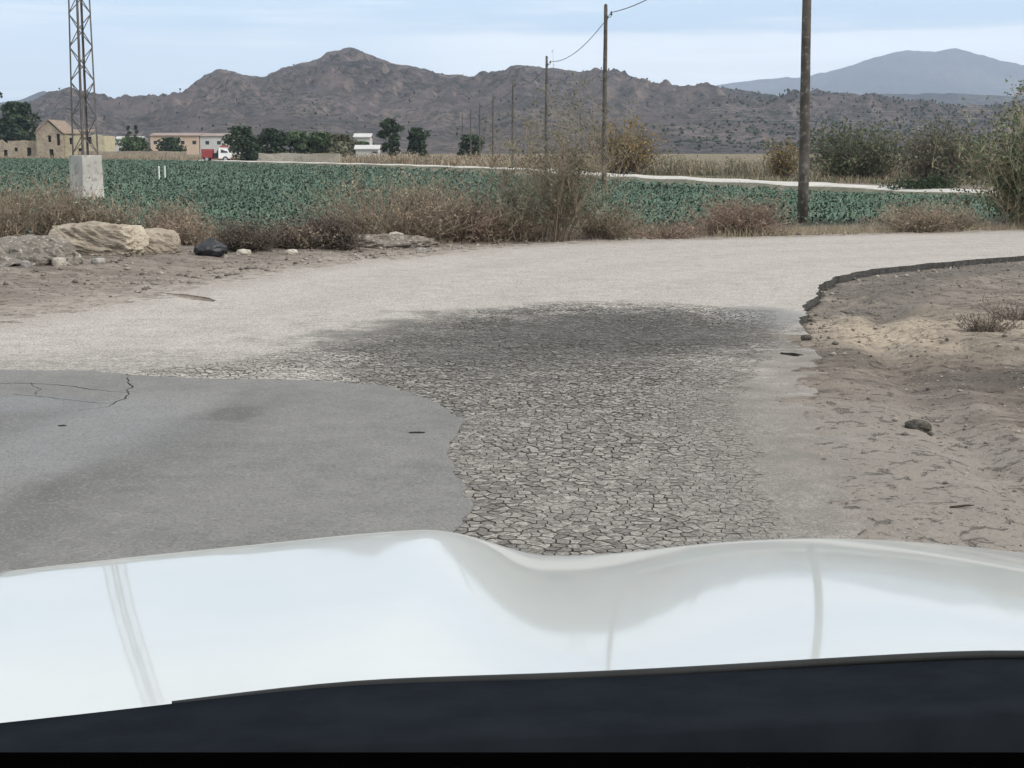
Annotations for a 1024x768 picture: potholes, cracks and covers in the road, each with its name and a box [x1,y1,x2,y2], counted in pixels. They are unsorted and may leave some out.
crack [0,374,134,410]
